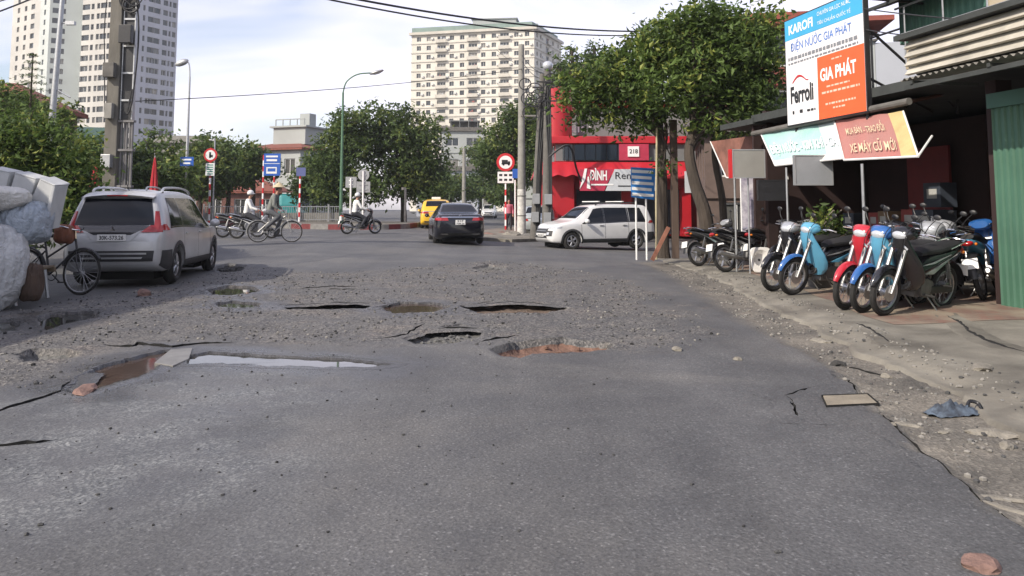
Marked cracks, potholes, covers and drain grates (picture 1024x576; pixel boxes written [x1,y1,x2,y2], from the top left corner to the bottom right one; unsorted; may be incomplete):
pothole [177,350,409,370]
pothole [448,300,580,315]
crack [838,320,912,346]
pothole [478,336,628,361]
pothole [206,300,269,309]
pothole [272,301,384,311]
pothole [26,310,111,332]
crack [753,362,1024,543]
pothole [211,263,251,273]
crack [79,340,256,352]
pothole [199,285,266,297]
pothole [52,348,181,398]
